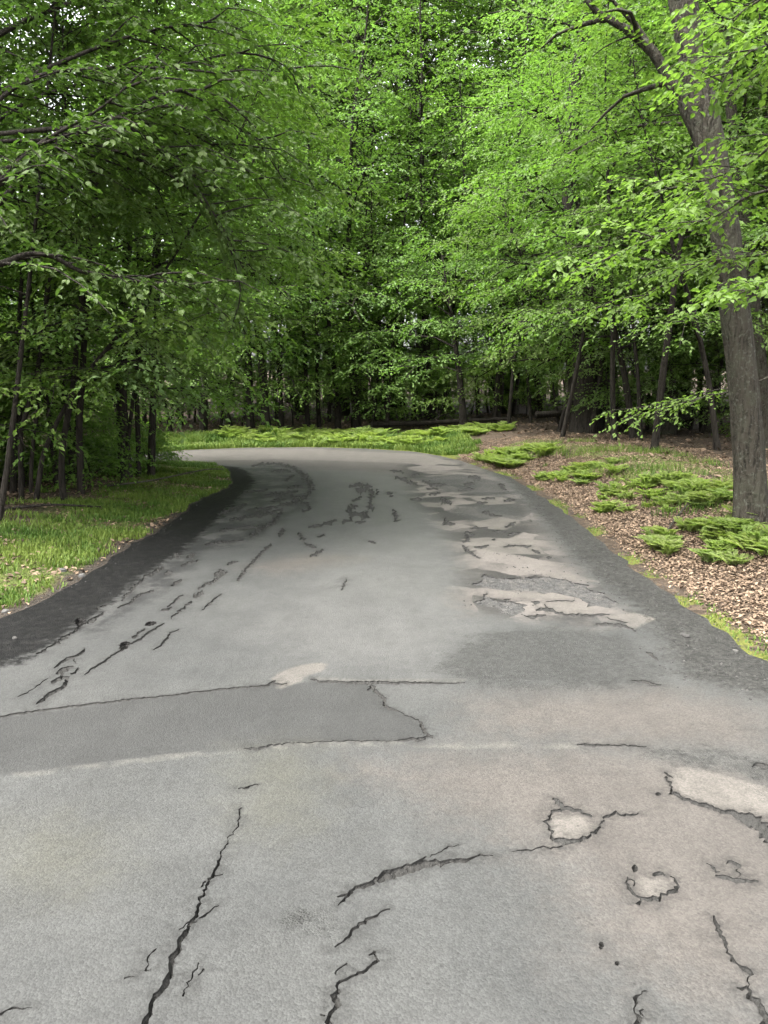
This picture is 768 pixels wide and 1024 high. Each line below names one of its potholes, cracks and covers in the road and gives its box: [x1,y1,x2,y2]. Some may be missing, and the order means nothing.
crack [18,462,552,704]
crack [320,844,493,1024]
crack [706,860,759,884]
